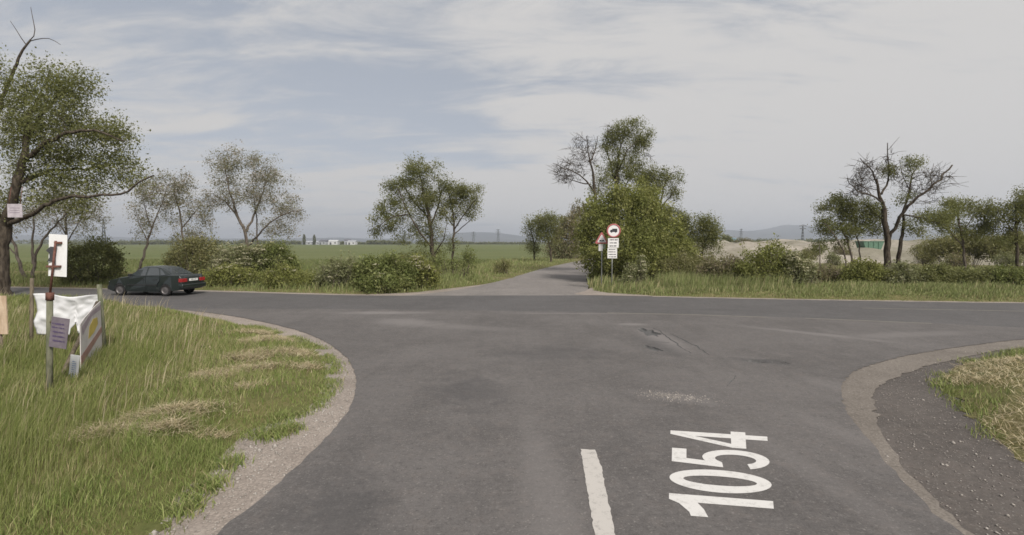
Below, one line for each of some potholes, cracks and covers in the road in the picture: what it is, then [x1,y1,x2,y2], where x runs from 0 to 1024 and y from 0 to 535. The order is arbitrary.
crack [653,329,709,355]
